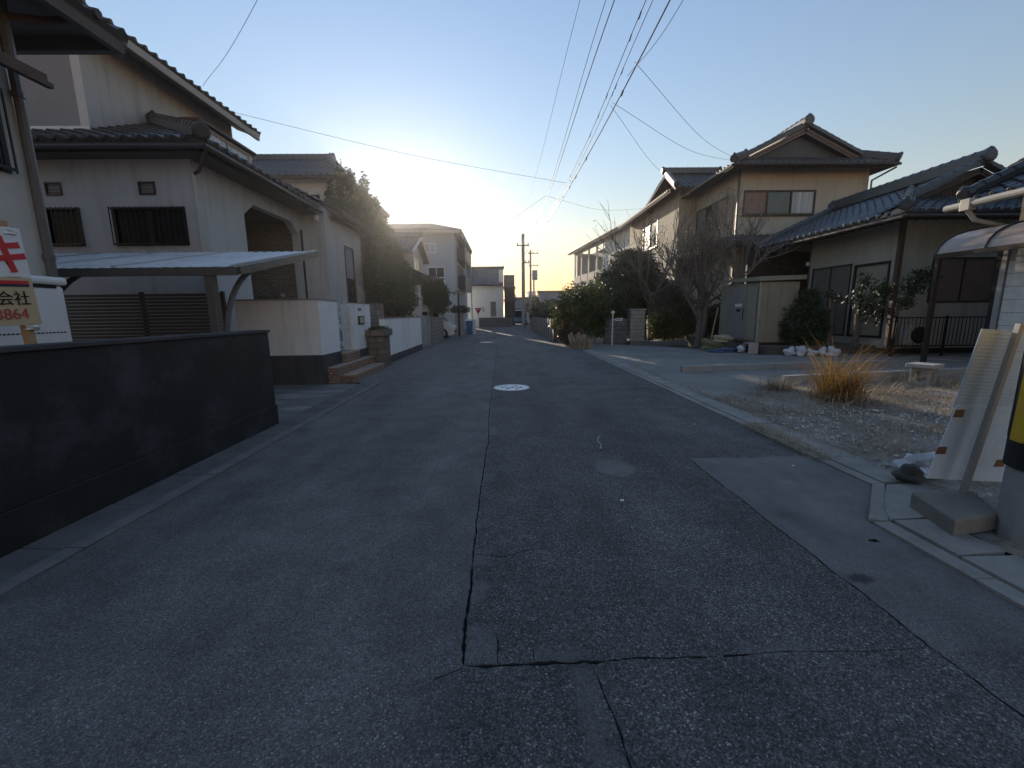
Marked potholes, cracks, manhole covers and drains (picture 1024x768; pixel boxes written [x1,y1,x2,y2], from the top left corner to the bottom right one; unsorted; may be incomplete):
crack [427,351,1024,768]
